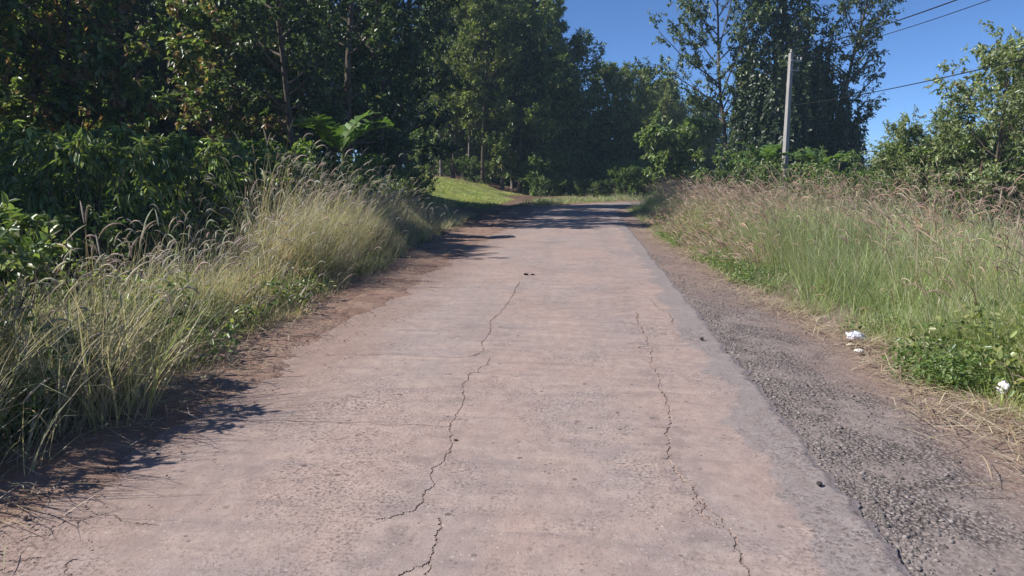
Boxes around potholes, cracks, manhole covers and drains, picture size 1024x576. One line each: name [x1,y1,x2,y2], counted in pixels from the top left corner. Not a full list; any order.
crack [636,297,752,576]
crack [324,281,520,576]
